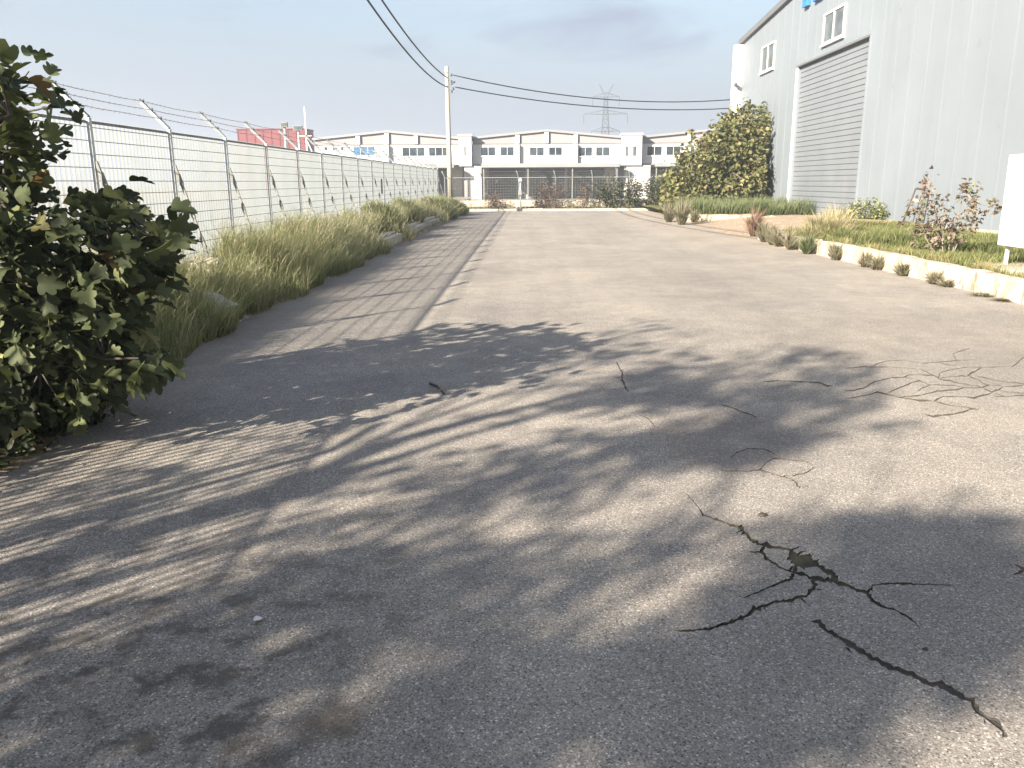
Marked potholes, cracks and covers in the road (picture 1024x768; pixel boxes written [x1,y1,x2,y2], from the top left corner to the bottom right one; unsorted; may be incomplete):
crack [674,448,1008,737]
crack [762,348,1024,418]
